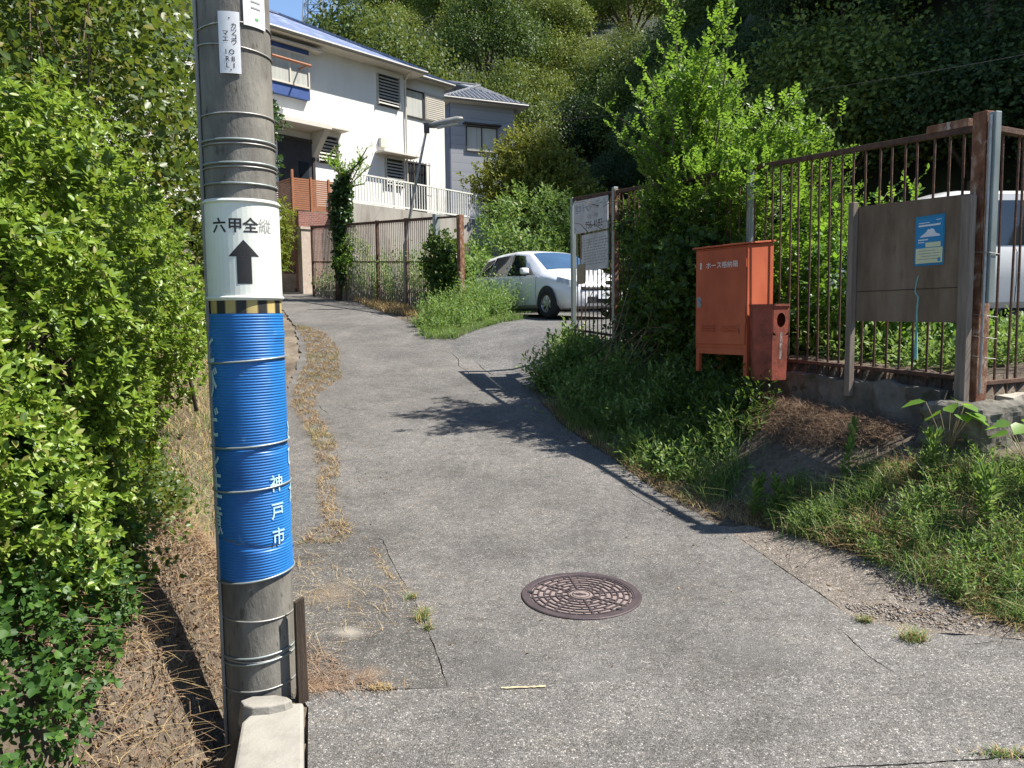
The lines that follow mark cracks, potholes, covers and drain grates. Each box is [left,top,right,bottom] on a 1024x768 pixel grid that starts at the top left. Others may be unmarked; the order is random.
manhole cover [521,572,642,620]
crack [361,538,448,691]
